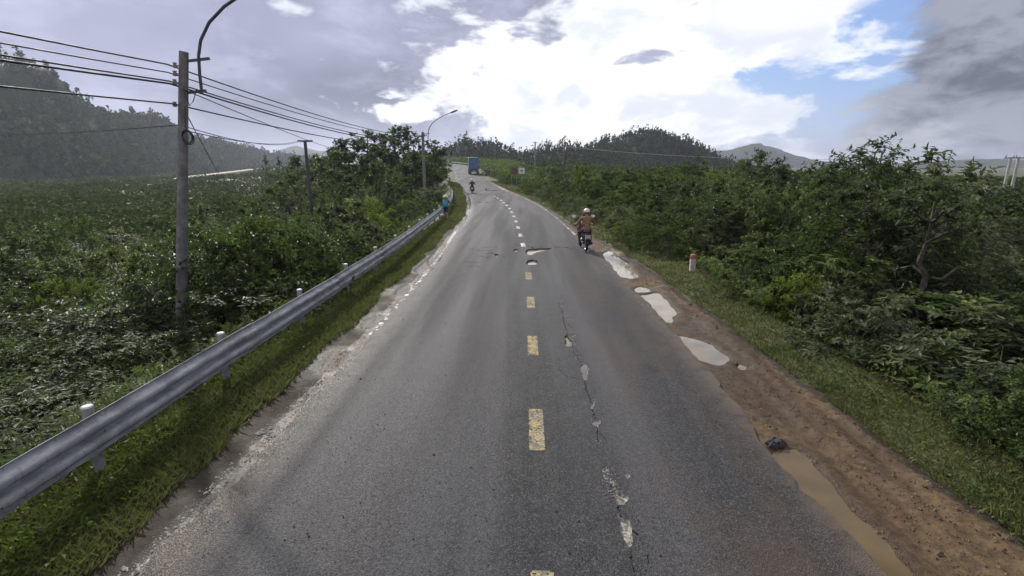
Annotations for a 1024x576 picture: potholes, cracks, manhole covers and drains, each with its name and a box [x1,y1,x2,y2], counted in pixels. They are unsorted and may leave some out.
pothole [618,516,633,548]
pothole [611,488,628,505]
pothole [579,363,589,381]
